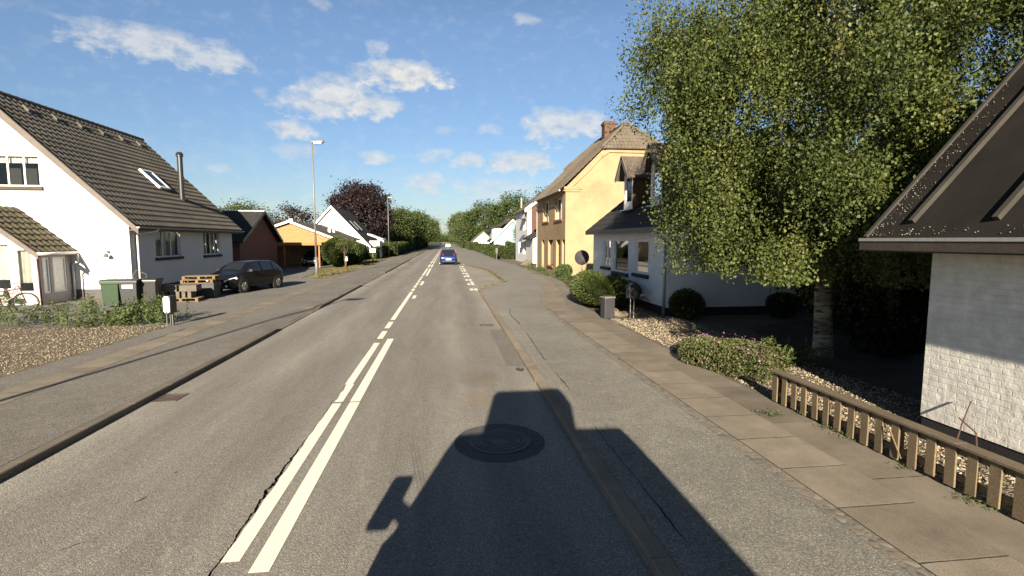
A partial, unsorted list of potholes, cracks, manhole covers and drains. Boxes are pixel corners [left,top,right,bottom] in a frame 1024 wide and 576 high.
crack [595,427,685,539]
manhole cover [454,424,545,462]
drain grate [152,393,189,402]
